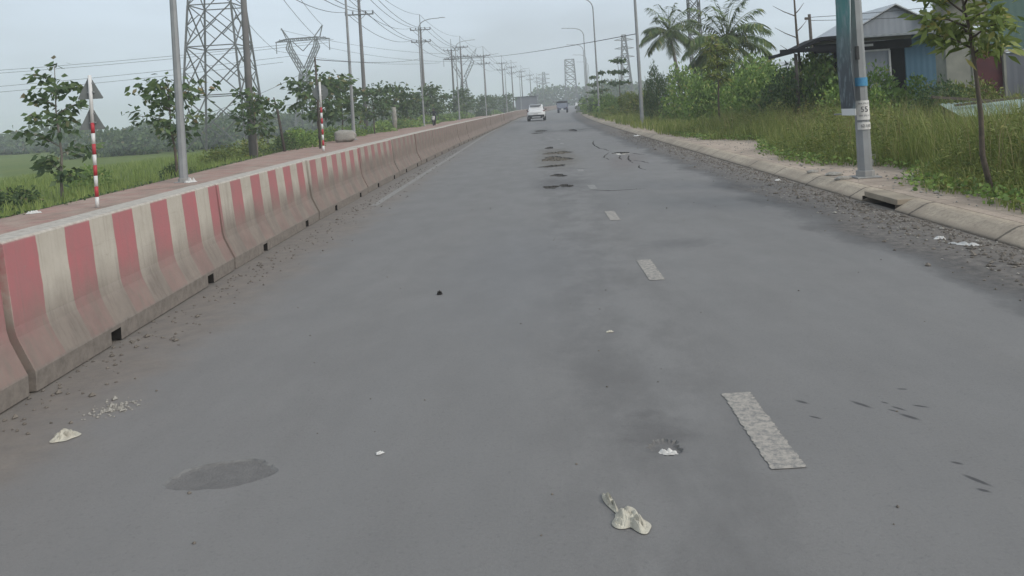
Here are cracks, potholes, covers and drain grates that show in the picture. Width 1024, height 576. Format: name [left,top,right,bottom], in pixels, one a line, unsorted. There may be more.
pothole [646,438,683,456]
crack [563,128,648,169]
